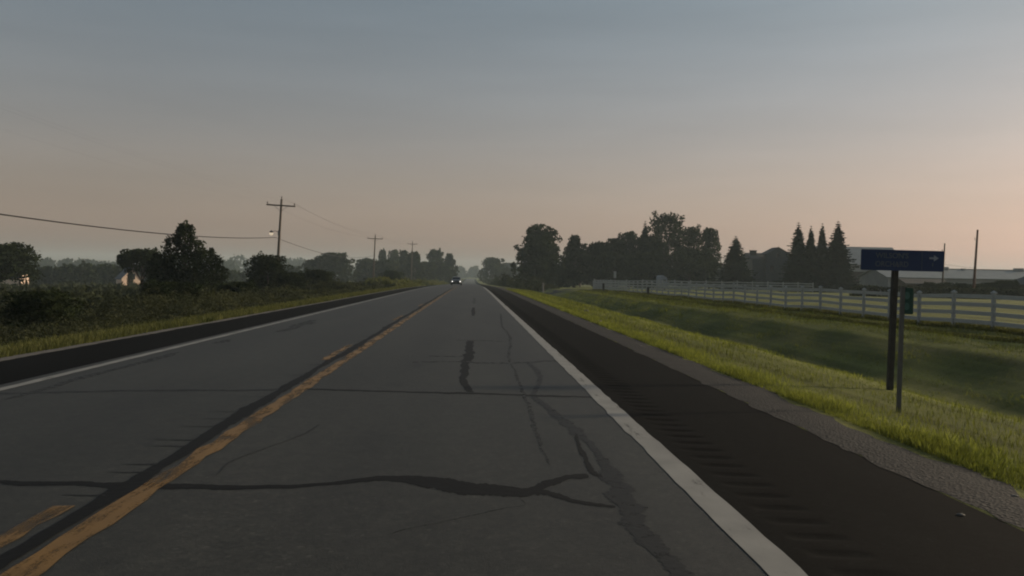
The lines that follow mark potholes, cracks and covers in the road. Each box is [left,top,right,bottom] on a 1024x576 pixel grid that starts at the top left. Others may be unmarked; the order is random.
crack [388,498,526,535]
crack [216,424,320,475]
